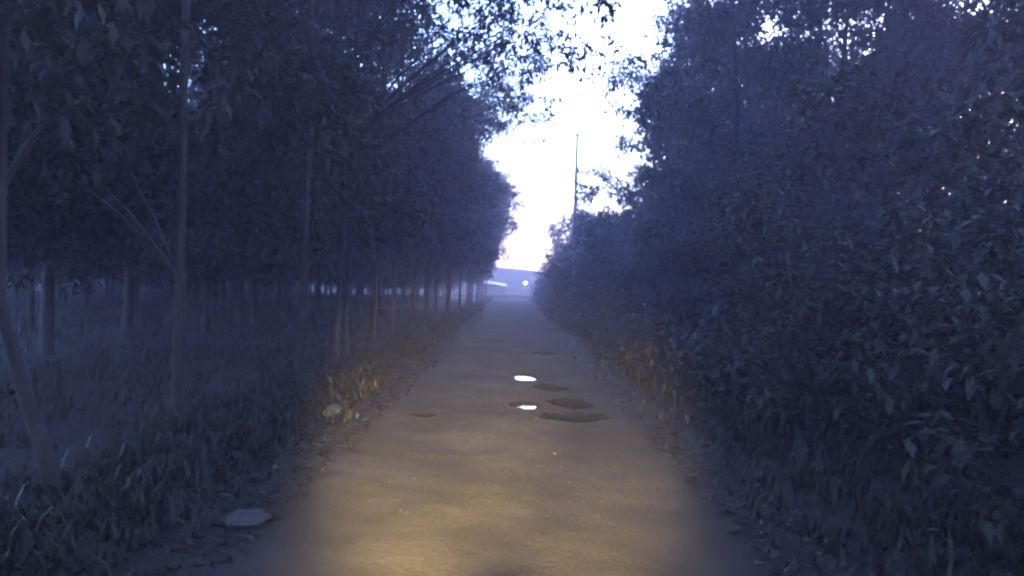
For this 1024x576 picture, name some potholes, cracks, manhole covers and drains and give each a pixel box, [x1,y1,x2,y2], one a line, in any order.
pothole [504,400,544,410]
pothole [508,373,542,381]
pothole [531,410,618,424]
pothole [541,396,600,411]
pothole [529,383,576,393]
